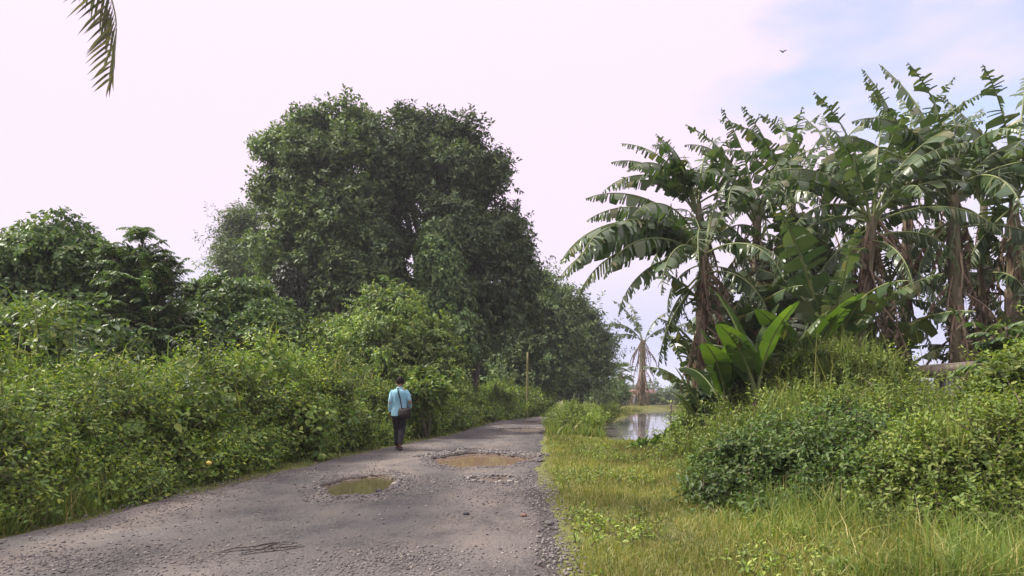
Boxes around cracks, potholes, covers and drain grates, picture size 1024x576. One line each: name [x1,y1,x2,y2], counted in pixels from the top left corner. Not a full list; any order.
crack [217,541,304,555]
pothole [423,451,543,469]
pothole [315,474,401,499]
pothole [464,475,520,483]
